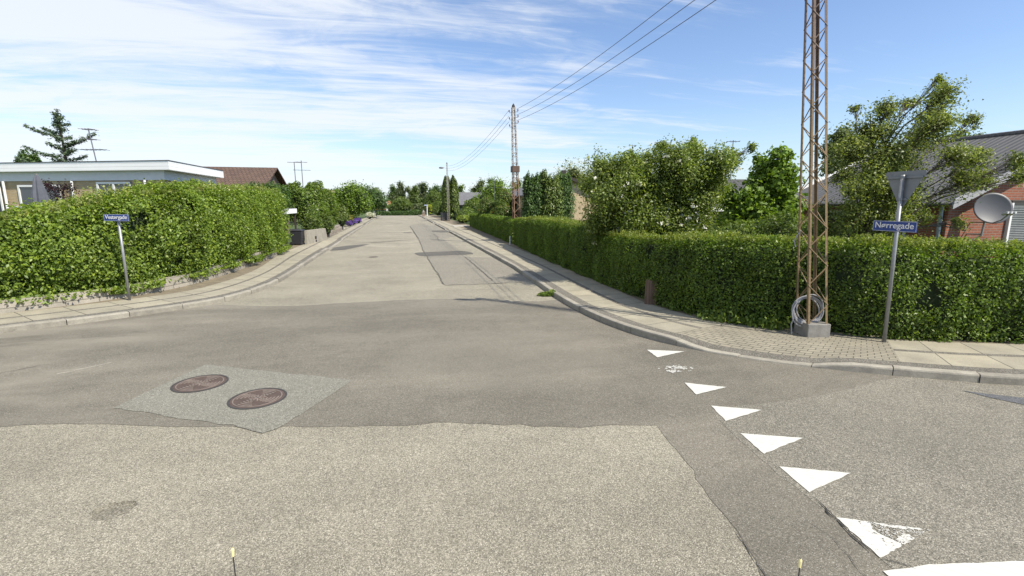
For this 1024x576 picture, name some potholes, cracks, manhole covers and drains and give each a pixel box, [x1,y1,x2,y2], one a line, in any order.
manhole cover [227,388,287,410]
manhole cover [170,374,229,393]
